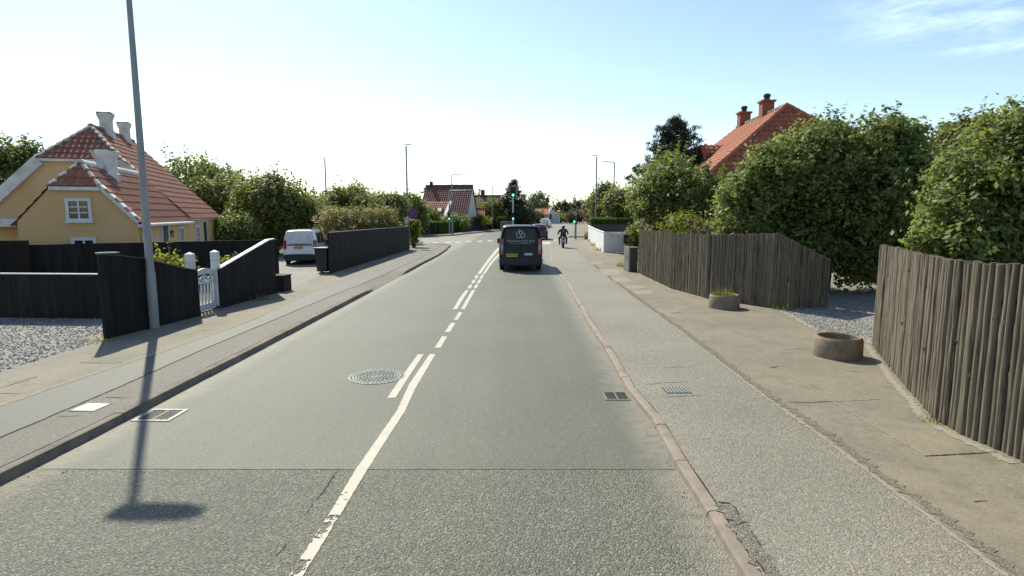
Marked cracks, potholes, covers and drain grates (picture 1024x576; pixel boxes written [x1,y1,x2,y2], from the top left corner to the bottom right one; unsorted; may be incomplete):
manhole cover [348,369,405,384]
crack [276,471,338,556]
drain grate [602,392,631,400]
drain grate [131,409,189,422]
